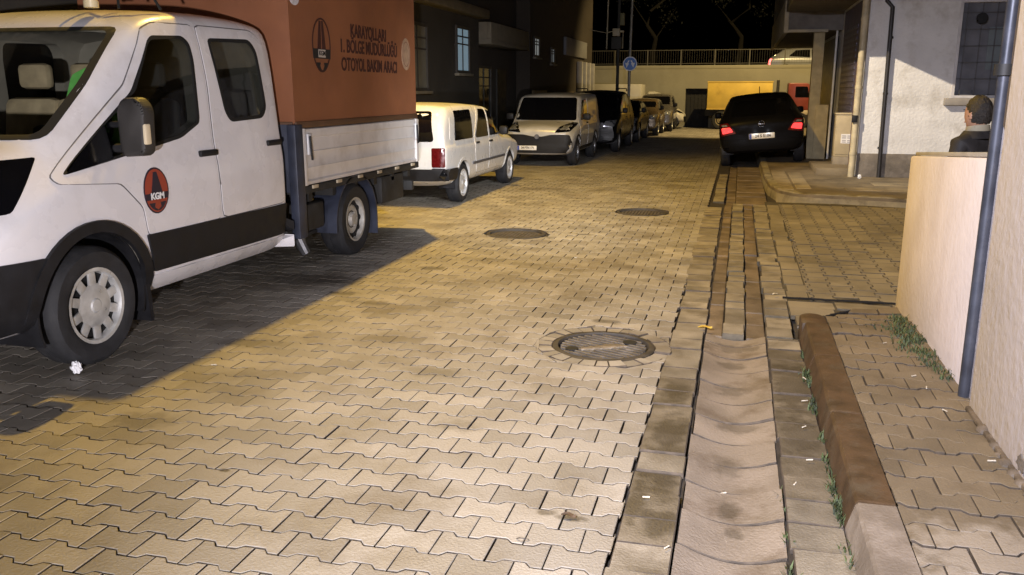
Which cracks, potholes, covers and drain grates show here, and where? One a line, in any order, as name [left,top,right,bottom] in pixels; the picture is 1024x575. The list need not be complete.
manhole cover [552,331,655,362]
manhole cover [487,229,546,239]
manhole cover [617,208,668,216]
